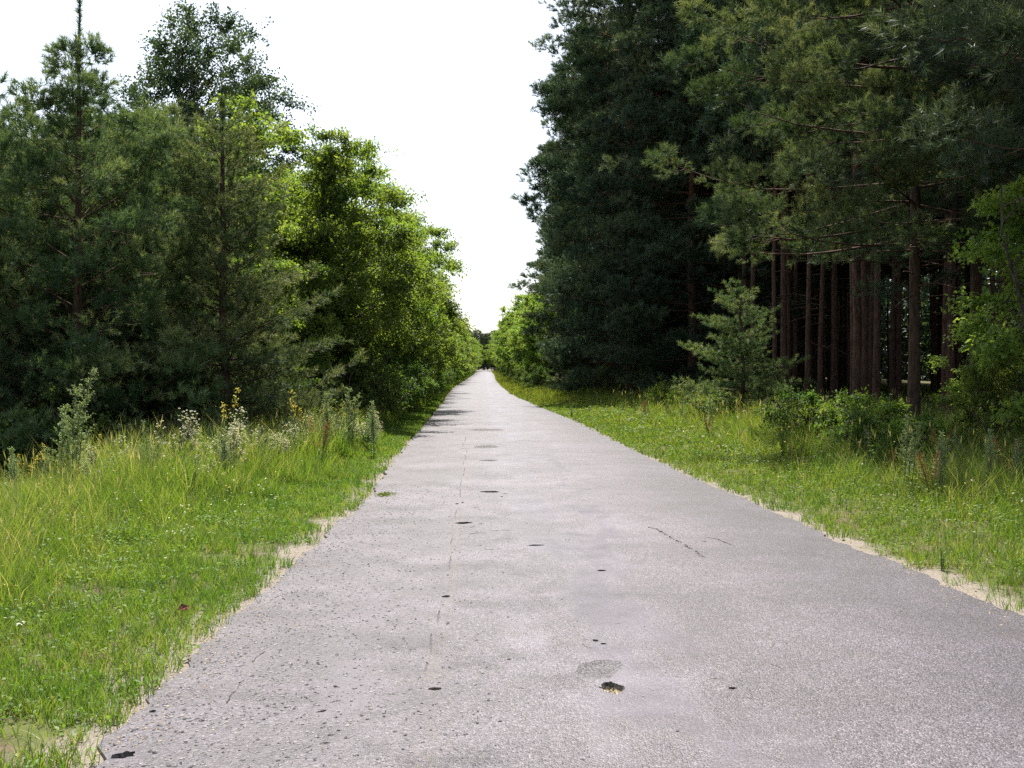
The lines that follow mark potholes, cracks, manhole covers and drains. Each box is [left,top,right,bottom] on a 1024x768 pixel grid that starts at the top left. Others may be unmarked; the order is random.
crack [226,652,265,704]
crack [648,527,734,557]
pothole [110,751,135,759]
pothole [598,681,625,695]
